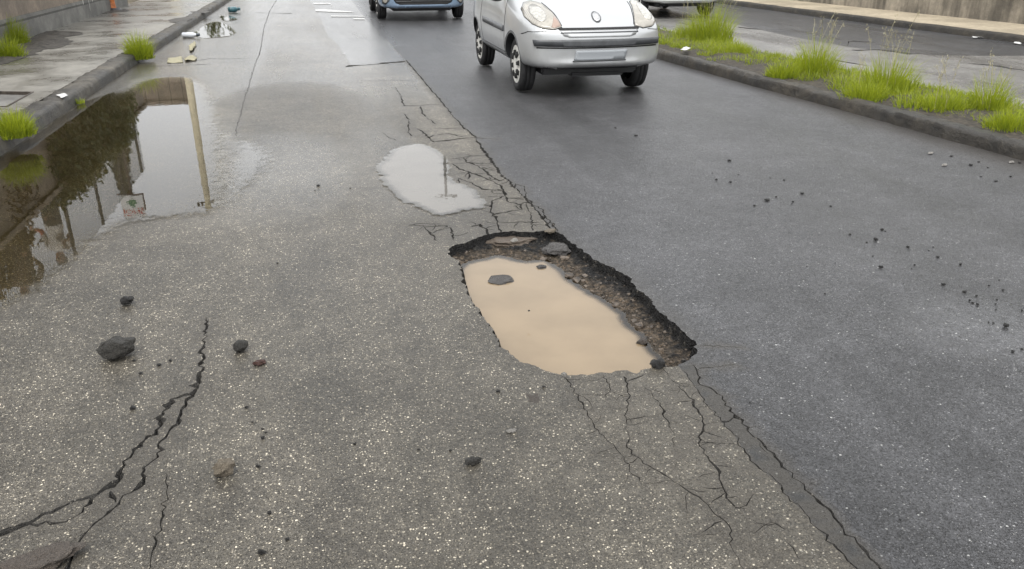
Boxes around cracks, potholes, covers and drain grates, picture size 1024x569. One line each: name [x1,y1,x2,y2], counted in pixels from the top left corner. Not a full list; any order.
crack [346,60,559,241]
crack [0,319,209,569]
crack [562,345,882,569]
manhole cover [0,91,34,107]
pothole [448,230,697,375]
